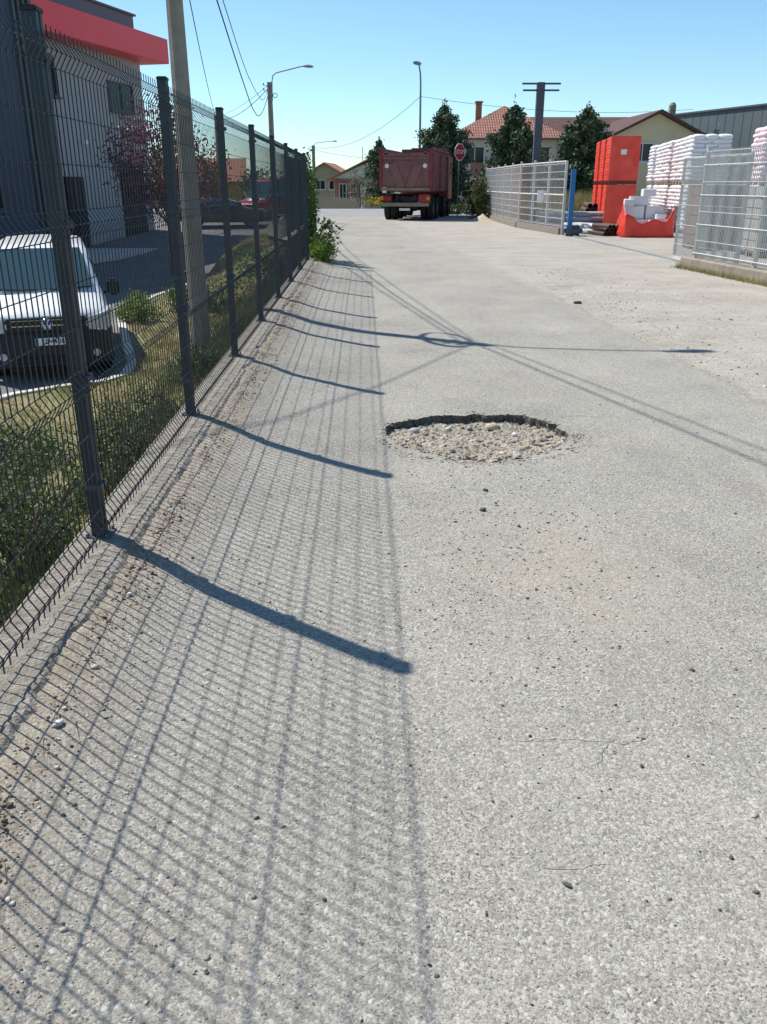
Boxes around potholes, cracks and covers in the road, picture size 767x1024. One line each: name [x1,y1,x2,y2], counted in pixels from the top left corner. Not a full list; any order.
pothole [380,412,571,463]
crack [504,733,656,768]
